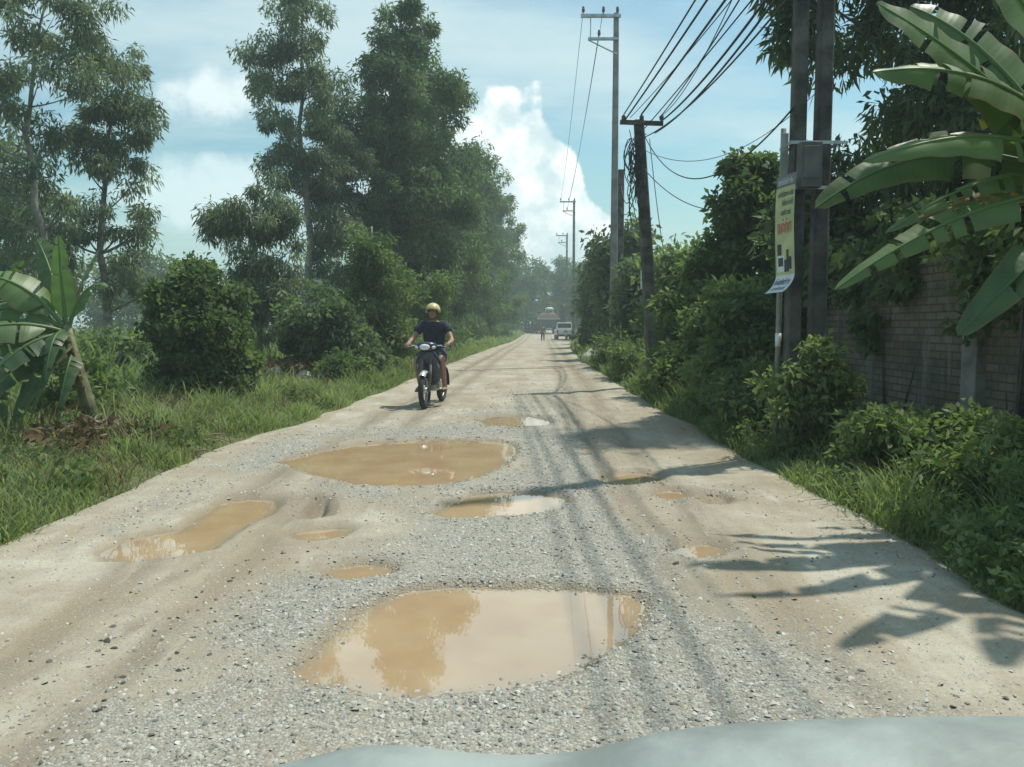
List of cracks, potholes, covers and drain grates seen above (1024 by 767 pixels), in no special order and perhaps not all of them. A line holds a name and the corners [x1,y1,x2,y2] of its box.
pothole [277,576,665,700]
pothole [314,554,408,579]
pothole [593,468,672,485]
pothole [279,517,365,541]
pothole [424,485,584,518]
pothole [472,414,557,427]
pothole [88,492,293,562]
pothole [654,534,739,558]
pothole [643,483,698,499]
pothole [294,495,342,519]
pothole [273,436,528,486]
